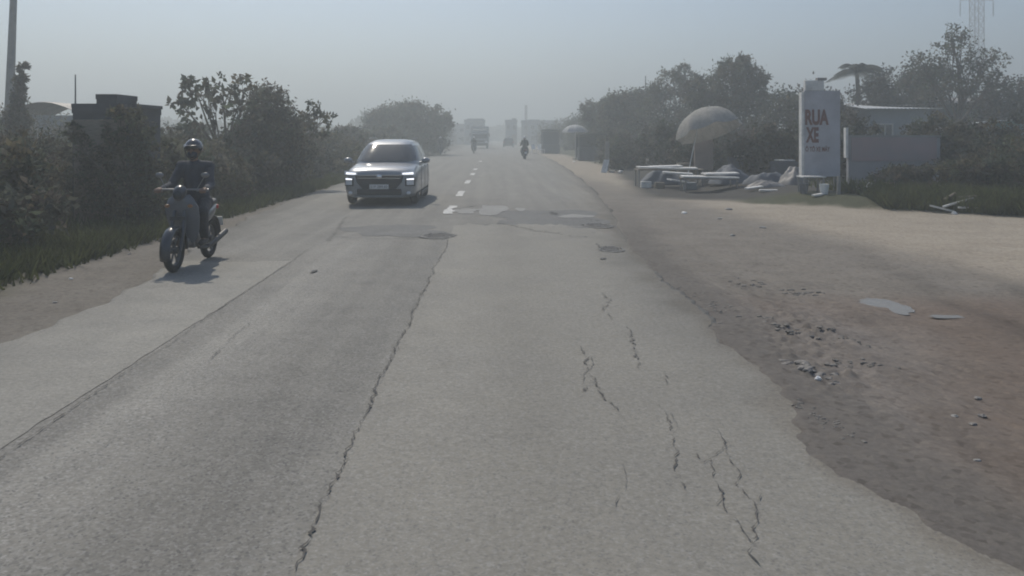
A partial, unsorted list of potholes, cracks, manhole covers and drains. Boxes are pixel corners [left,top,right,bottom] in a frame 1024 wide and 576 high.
crack [659,405,687,490]
crack [697,430,764,570]
crack [580,346,618,410]
crack [601,292,641,368]
